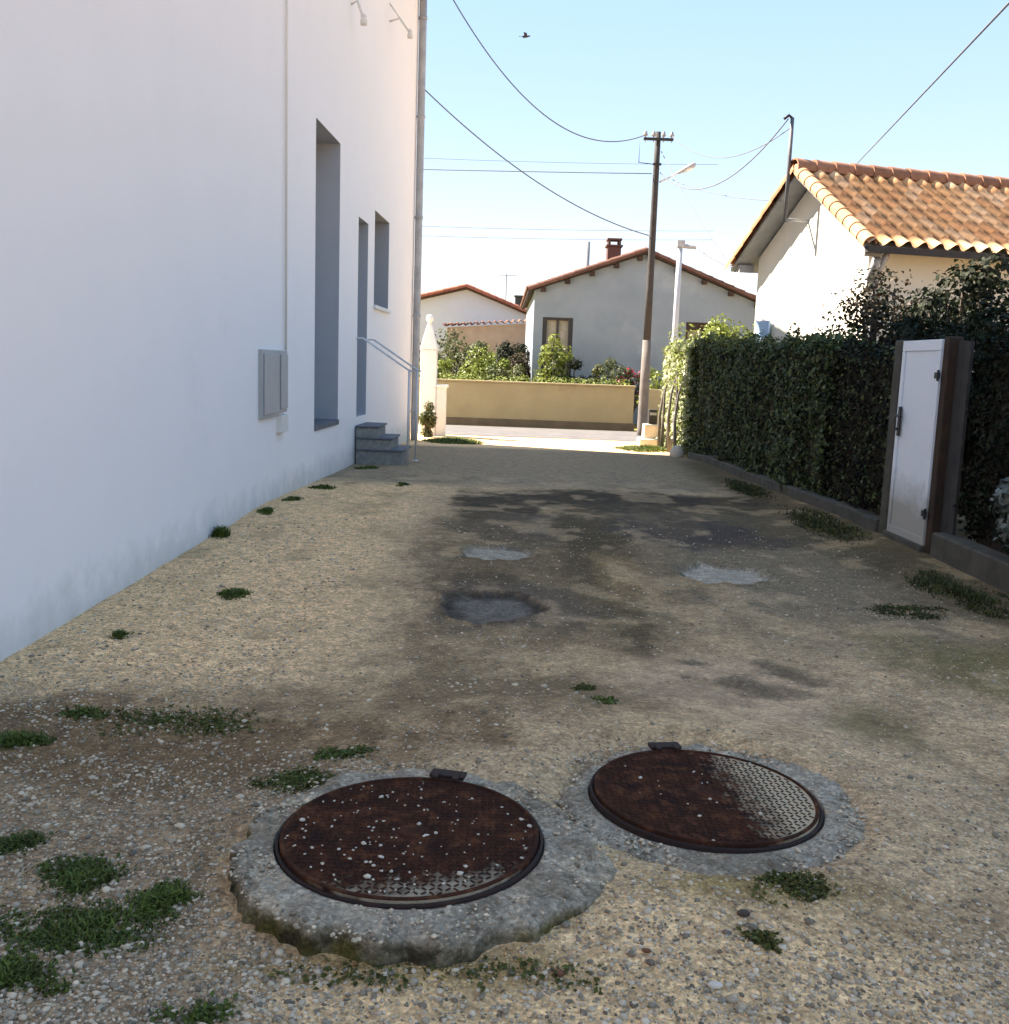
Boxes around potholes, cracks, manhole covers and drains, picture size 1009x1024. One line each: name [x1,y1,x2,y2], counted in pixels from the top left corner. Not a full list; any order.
pothole [432,587,556,628]
manhole cover [589,742,823,854]
manhole cover [275,768,543,910]
